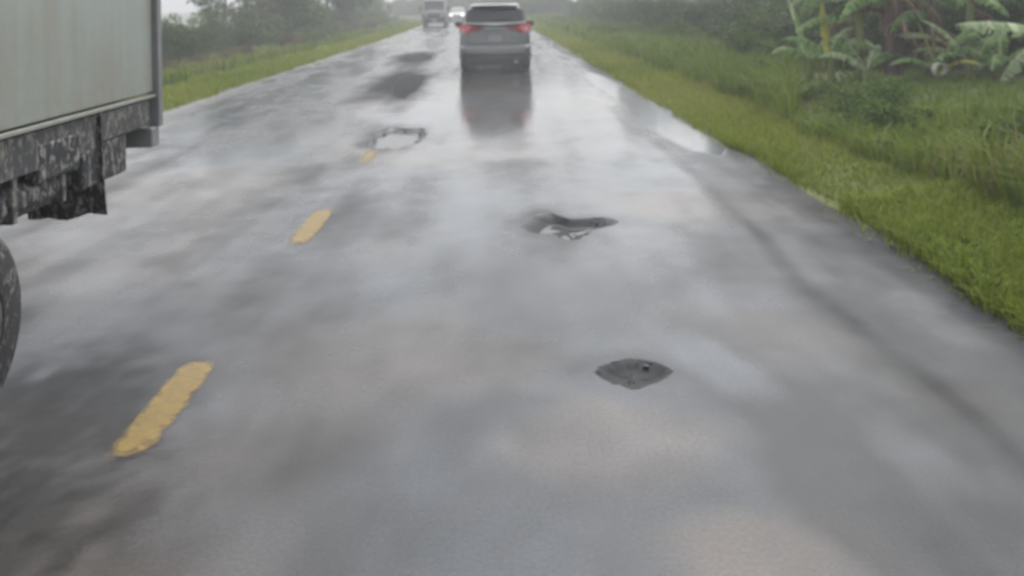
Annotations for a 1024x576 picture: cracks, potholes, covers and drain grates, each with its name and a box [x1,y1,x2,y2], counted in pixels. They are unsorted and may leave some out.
pothole [519,213,619,240]
pothole [593,359,675,390]
pothole [398,53,432,62]
pothole [366,128,428,149]
